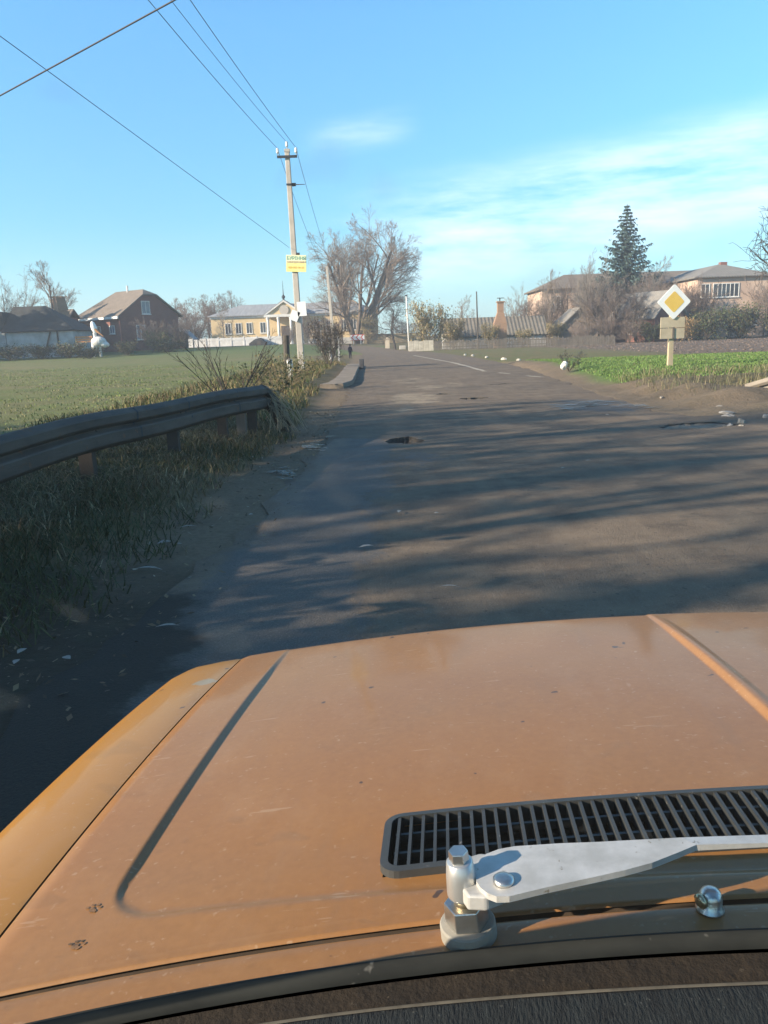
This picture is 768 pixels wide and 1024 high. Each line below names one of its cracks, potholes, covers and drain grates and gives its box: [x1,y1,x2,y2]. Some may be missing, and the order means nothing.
pothole [385,436,424,444]
